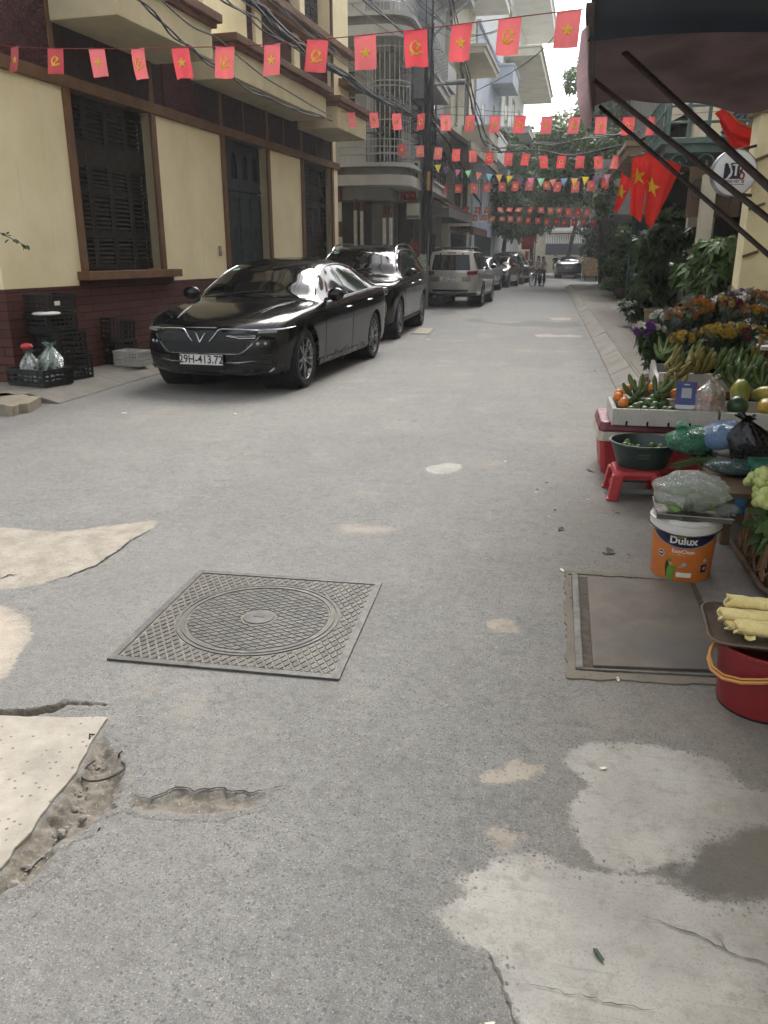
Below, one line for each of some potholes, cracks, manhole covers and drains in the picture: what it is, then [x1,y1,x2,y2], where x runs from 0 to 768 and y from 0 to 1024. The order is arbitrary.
pothole [112,782,276,823]
manhole cover [563,570,718,686]
crack [0,697,116,717]
crack [485,949,650,1024]
manhole cover [107,570,382,681]
crack [642,915,768,965]
pothole [0,722,138,908]
